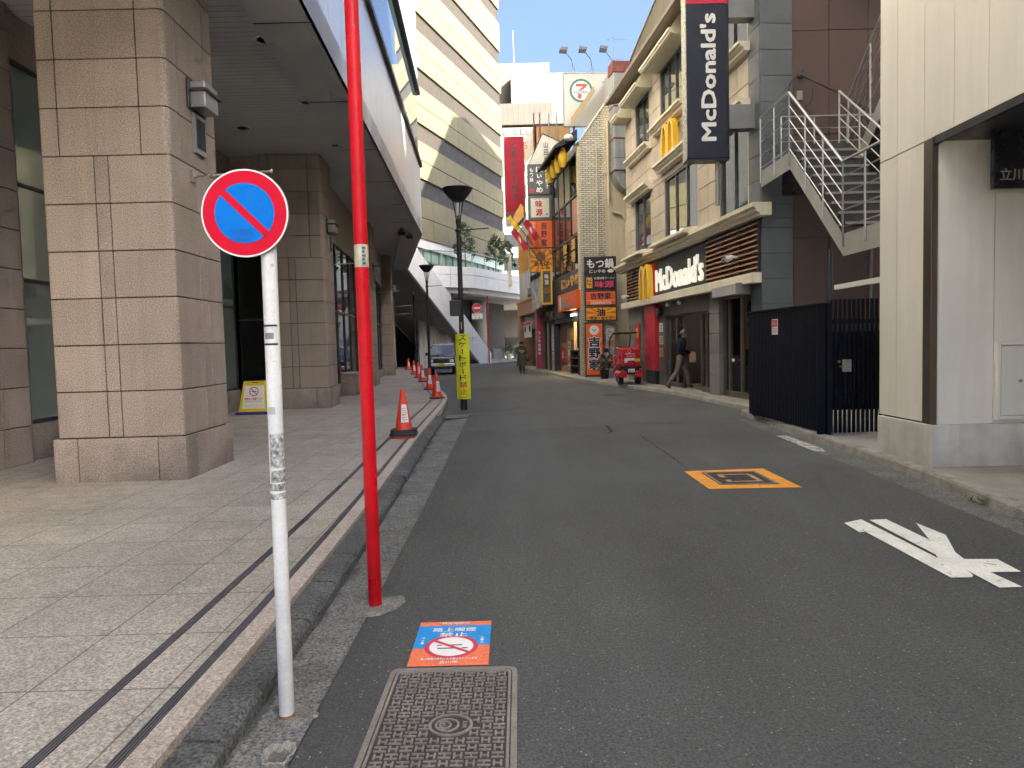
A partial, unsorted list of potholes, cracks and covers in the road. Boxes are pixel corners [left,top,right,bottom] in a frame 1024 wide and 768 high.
manhole cover [353,666,517,768]
crack [604,423,688,469]
manhole cover [702,471,778,485]
